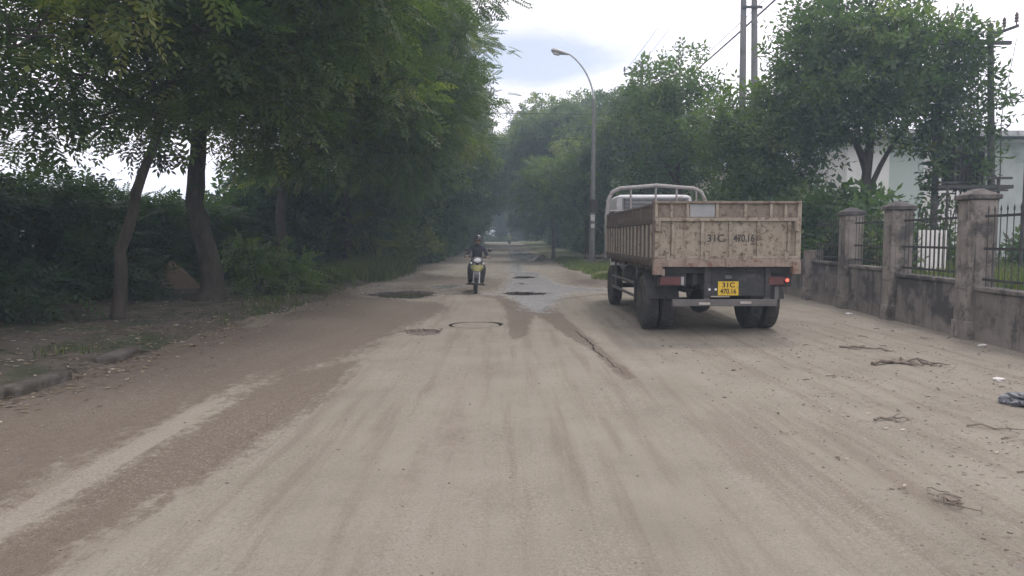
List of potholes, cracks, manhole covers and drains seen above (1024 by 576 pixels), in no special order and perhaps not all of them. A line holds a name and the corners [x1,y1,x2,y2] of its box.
pothole [368,291,436,299]
crack [575,330,624,374]
